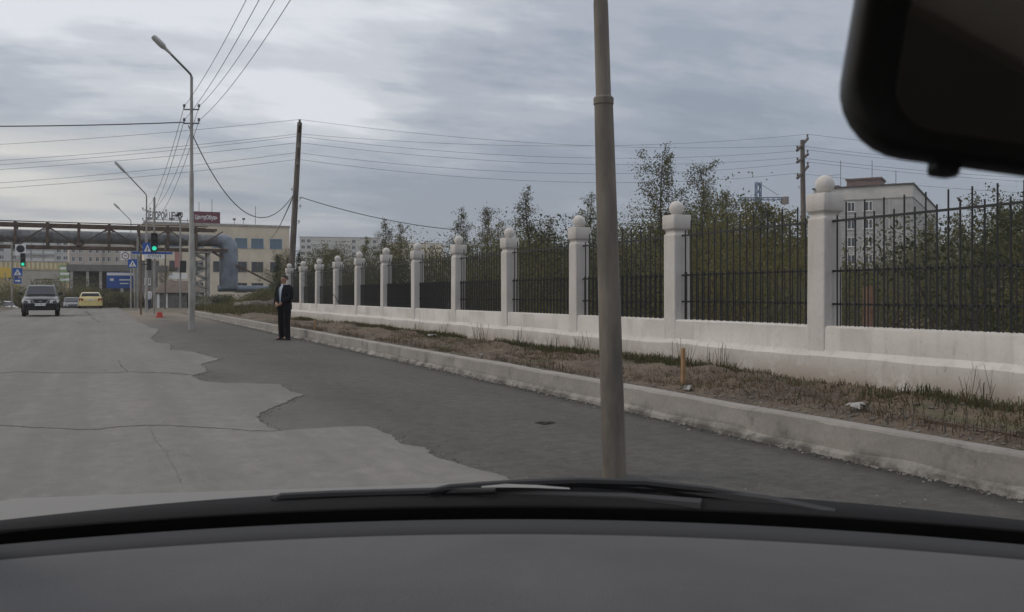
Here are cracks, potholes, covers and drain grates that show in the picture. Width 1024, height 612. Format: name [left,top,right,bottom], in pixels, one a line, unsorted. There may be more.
crack [4,364,189,375]
crack [0,424,278,484]
